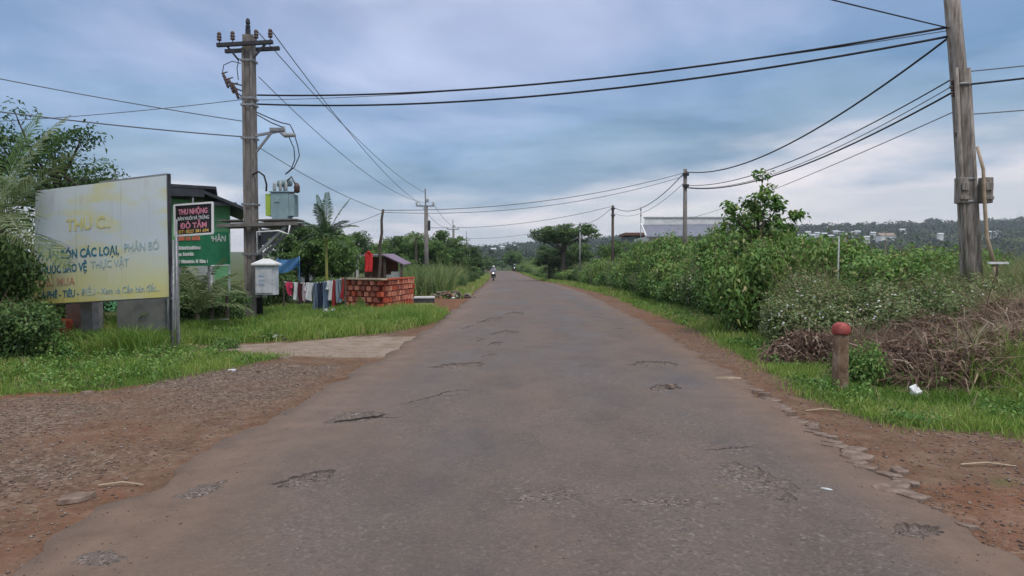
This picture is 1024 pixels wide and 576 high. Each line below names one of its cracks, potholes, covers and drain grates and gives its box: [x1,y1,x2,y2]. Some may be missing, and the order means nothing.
pothole [70,549,128,567]
pothole [268,469,336,488]
pothole [323,411,386,425]
pothole [172,480,227,500]
pothole [649,384,682,392]
crack [334,390,468,423]
pothole [892,522,945,540]
